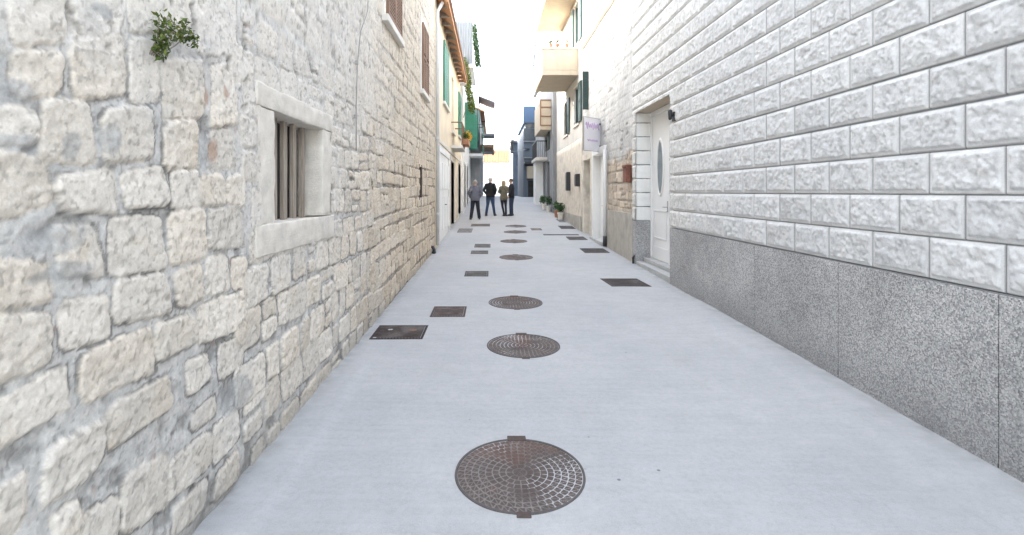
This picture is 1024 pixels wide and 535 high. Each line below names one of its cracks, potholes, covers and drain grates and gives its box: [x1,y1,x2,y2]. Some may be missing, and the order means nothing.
utility cover [369,325,428,339]
manhole cover [489,295,543,310]
manhole cover [455,436,586,518]
utility cover [430,306,467,317]
manhole cover [487,333,560,359]
utility cover [600,278,652,287]
